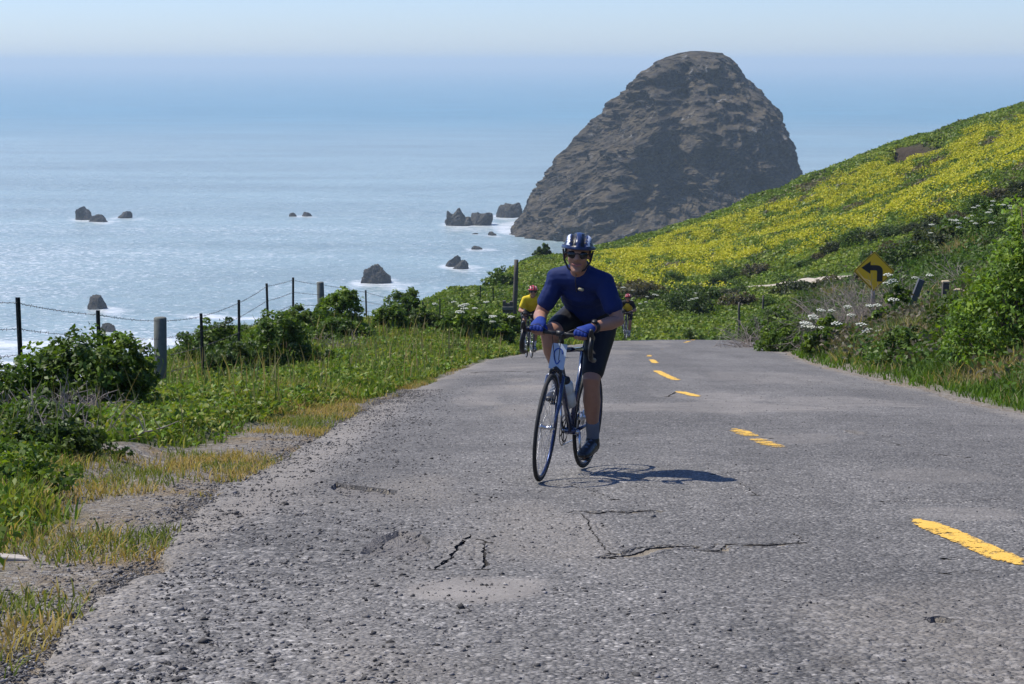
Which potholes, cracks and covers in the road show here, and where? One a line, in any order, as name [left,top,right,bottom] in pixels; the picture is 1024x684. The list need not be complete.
crack [427,534,499,579]
pothole [912,615,967,627]
crack [563,484,811,559]
